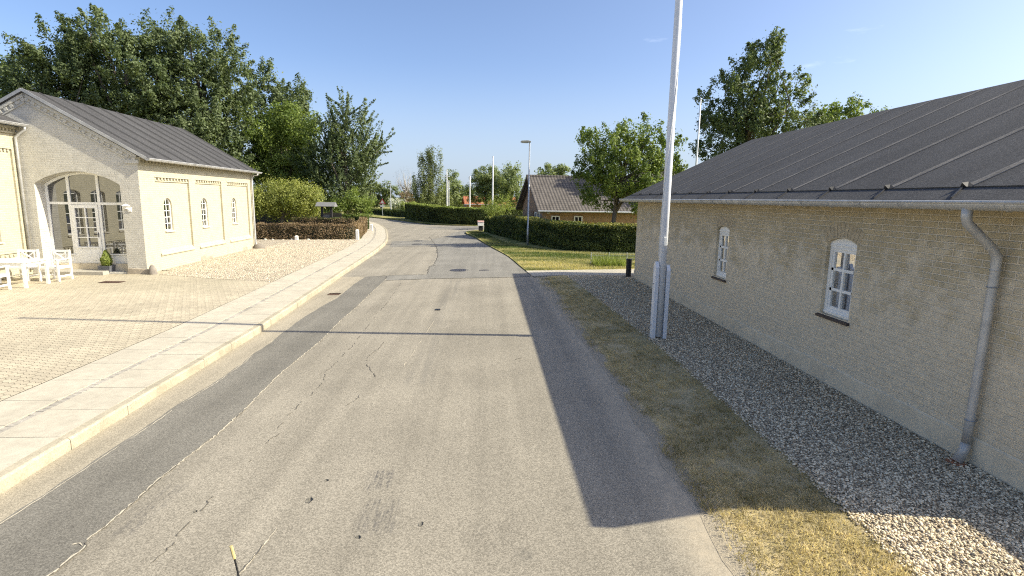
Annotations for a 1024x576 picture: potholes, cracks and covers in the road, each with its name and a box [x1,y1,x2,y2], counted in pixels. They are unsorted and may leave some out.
crack [0,279,401,576]
